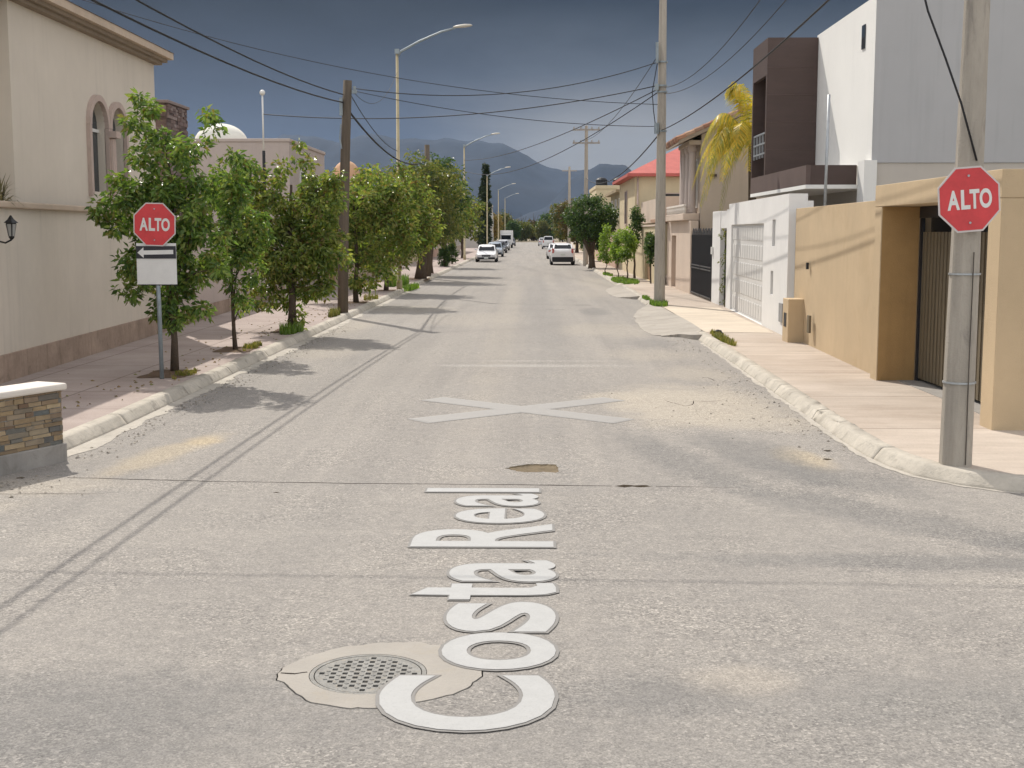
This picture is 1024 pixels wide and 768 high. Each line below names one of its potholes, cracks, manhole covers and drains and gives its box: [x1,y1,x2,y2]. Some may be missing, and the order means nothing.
manhole cover [276,642,483,709]
pothole [506,464,559,473]
